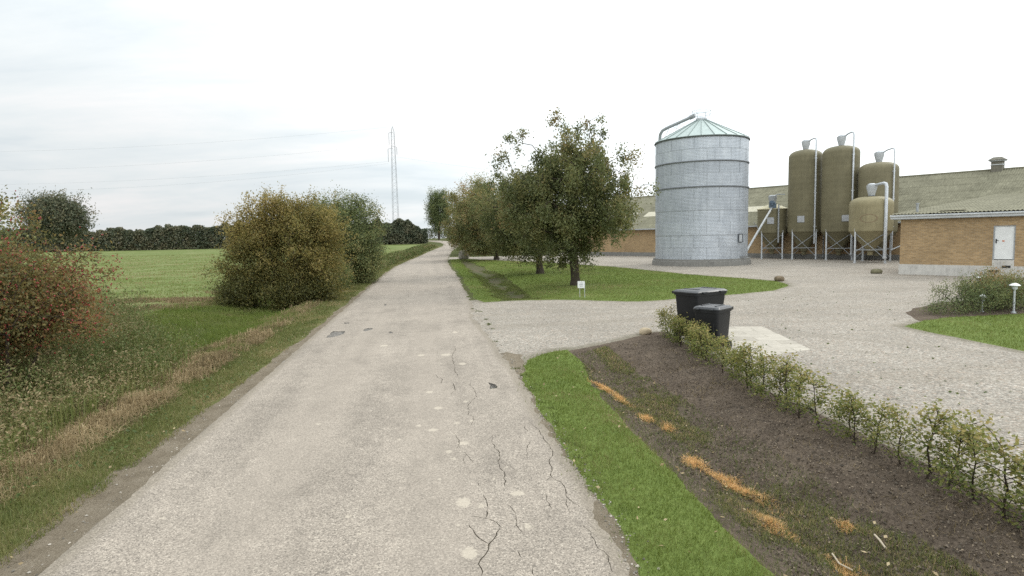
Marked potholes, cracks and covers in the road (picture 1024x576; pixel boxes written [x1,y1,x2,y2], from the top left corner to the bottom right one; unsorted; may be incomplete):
crack [524,423,612,571]
crack [469,435,522,576]
crack [435,349,477,462]
